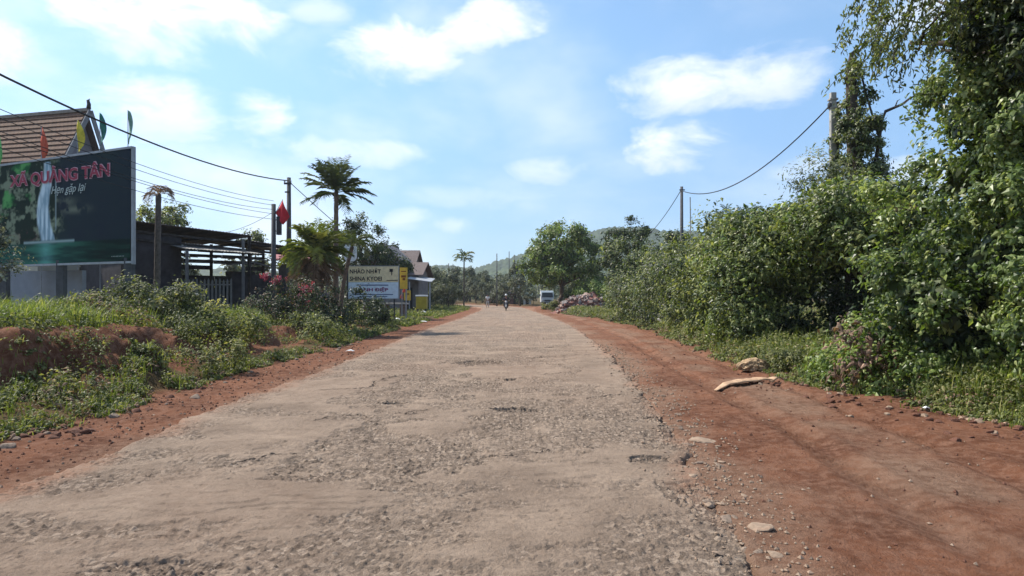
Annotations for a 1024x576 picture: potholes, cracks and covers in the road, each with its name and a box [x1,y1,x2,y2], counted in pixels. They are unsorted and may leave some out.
pothole [622,454,678,465]
pothole [479,405,552,413]
